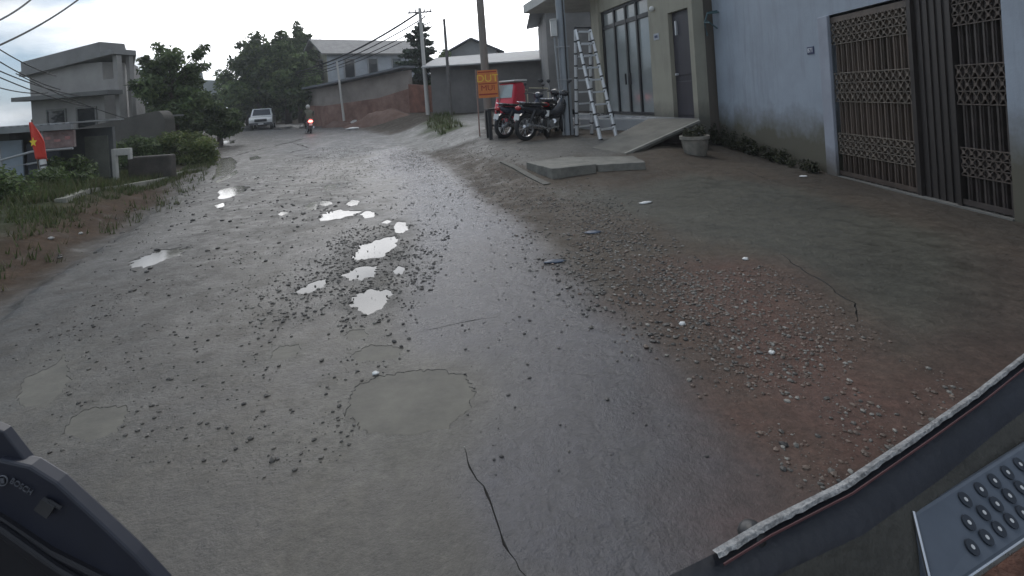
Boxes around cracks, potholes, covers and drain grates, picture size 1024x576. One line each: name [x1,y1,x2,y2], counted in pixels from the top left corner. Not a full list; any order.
crack [783,255,858,321]
pothole [295,278,329,294]
crack [464,447,526,576]
pothole [318,209,362,221]
pothole [394,221,409,233]
pothole [352,235,399,261]
pothole [127,246,193,268]
pothole [340,265,379,281]
